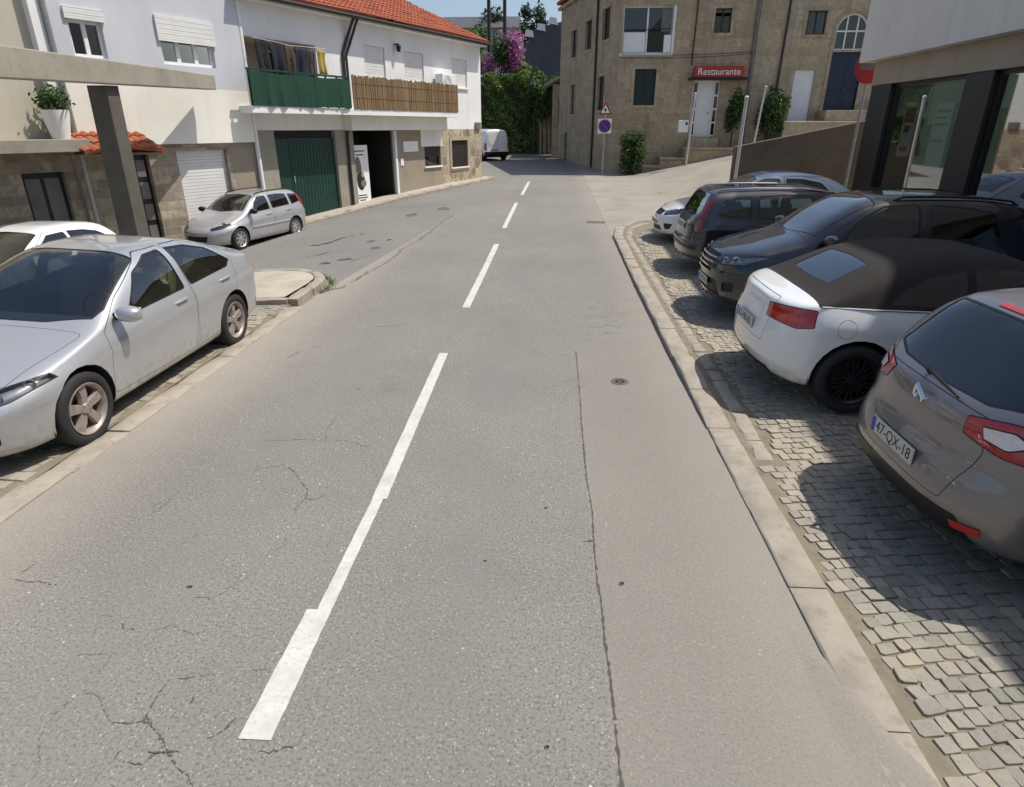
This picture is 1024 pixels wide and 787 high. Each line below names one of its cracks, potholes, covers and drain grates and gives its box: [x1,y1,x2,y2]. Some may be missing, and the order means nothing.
crack [38,653,215,786]
crack [254,464,327,512]
